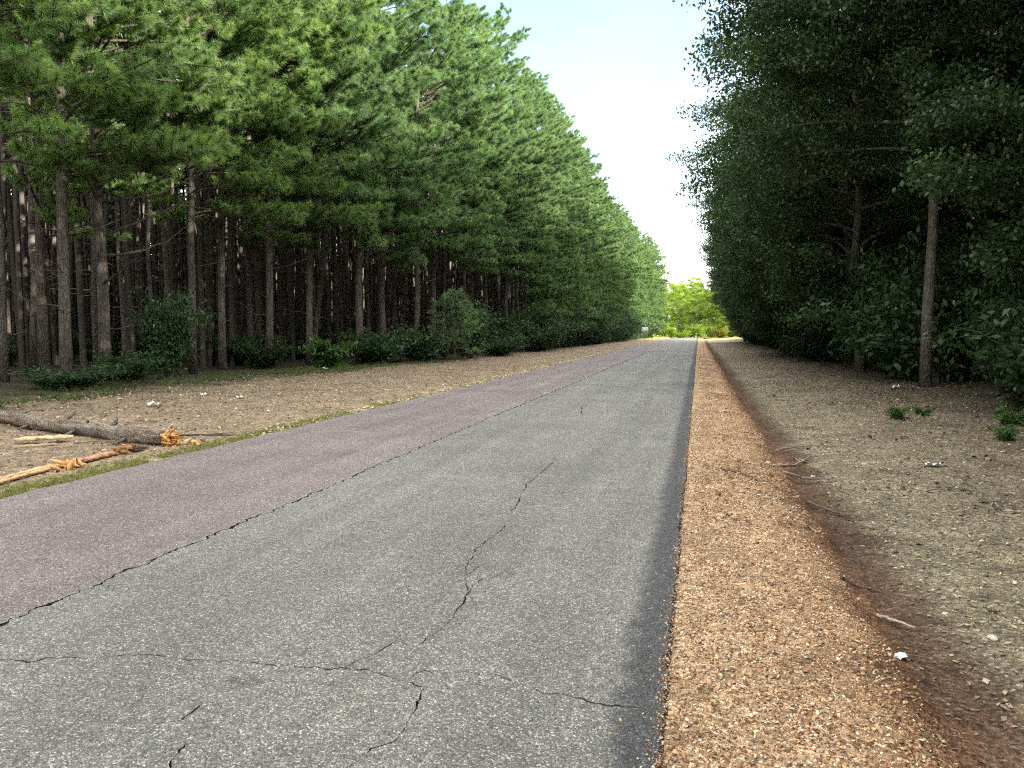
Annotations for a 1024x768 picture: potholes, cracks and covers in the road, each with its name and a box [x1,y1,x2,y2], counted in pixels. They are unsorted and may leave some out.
crack [453,671,641,708]
crack [0,352,647,626]
crack [0,461,554,768]
